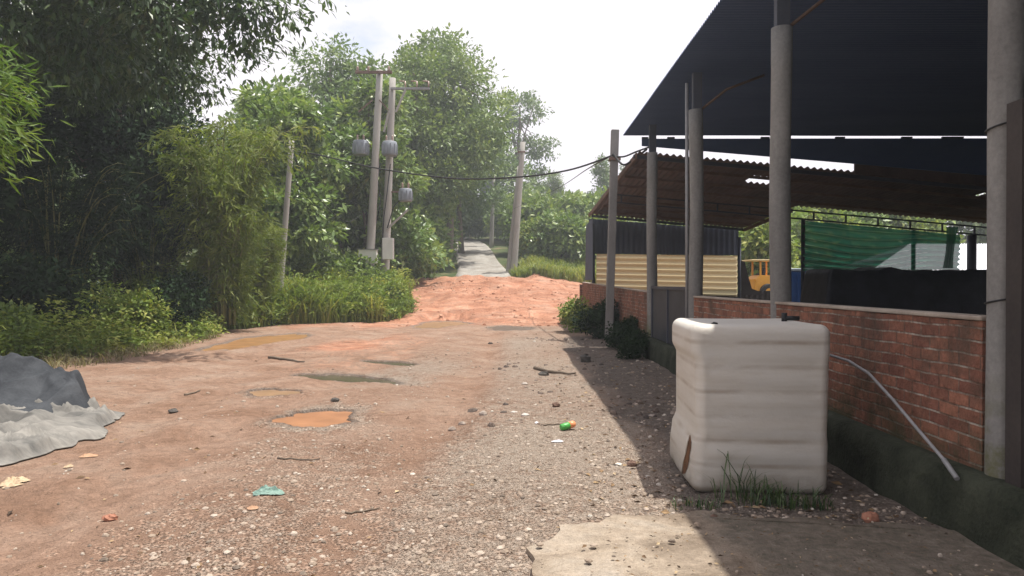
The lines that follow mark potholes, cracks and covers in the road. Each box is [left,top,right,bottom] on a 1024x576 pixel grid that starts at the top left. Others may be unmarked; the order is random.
pothole [355,359,424,367]
pothole [234,387,312,398]
pothole [278,373,414,385]
pothole [180,332,320,354]
pothole [255,407,364,430]
